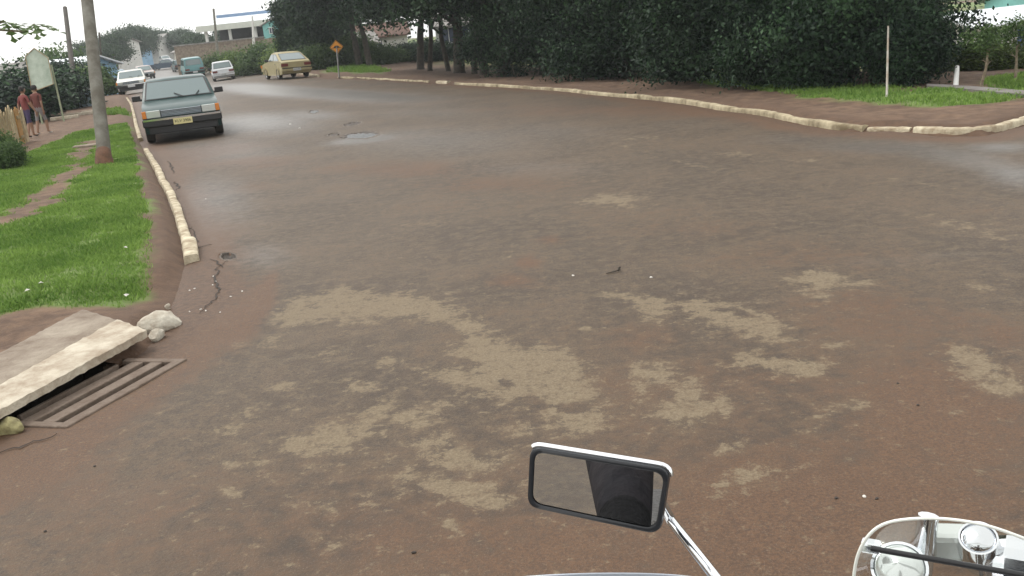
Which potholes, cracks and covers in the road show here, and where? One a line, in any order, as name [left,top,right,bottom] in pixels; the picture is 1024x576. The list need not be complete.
crack [189,227,226,312]
drain grate [0,358,187,428]
pothole [340,131,384,139]
pothole [219,252,237,261]
crack [0,433,57,453]
